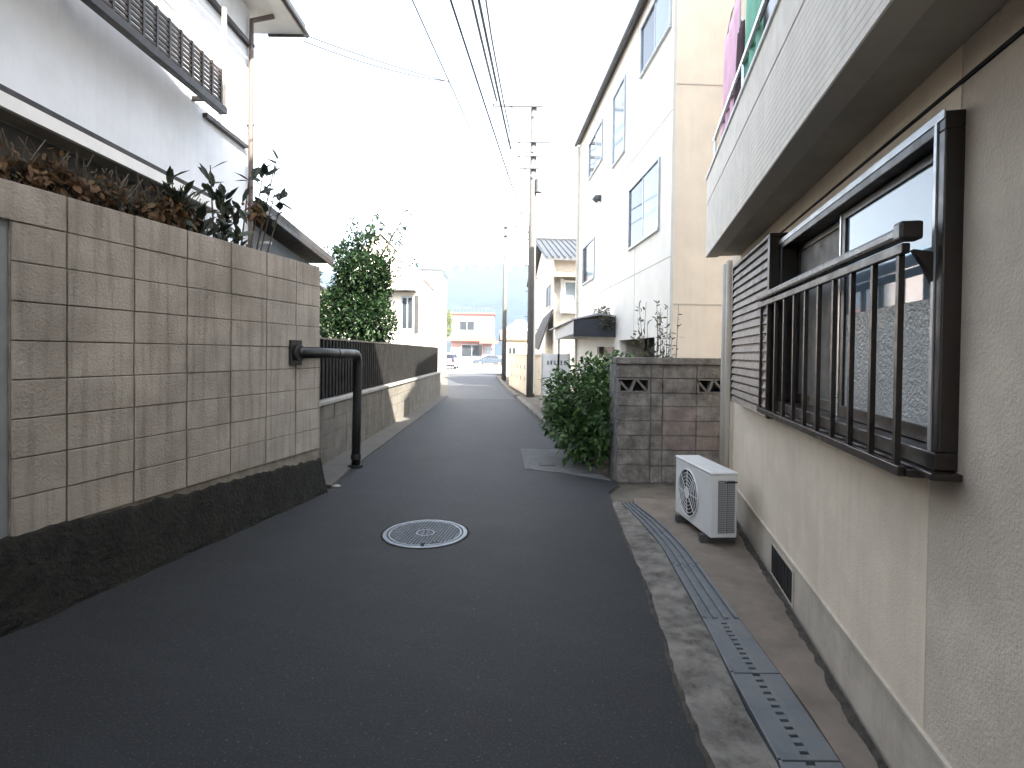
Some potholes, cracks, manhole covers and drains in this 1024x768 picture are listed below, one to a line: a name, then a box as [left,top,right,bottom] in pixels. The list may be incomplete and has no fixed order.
manhole cover [380,519,470,550]
